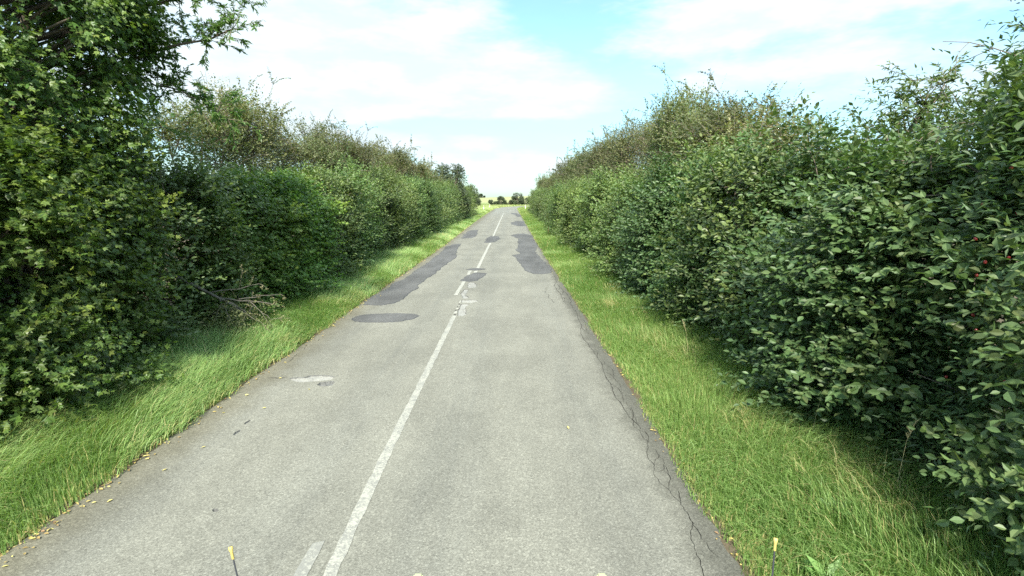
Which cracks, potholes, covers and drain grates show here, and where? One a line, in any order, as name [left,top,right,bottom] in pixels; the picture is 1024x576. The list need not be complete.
crack [537,276,718,576]
